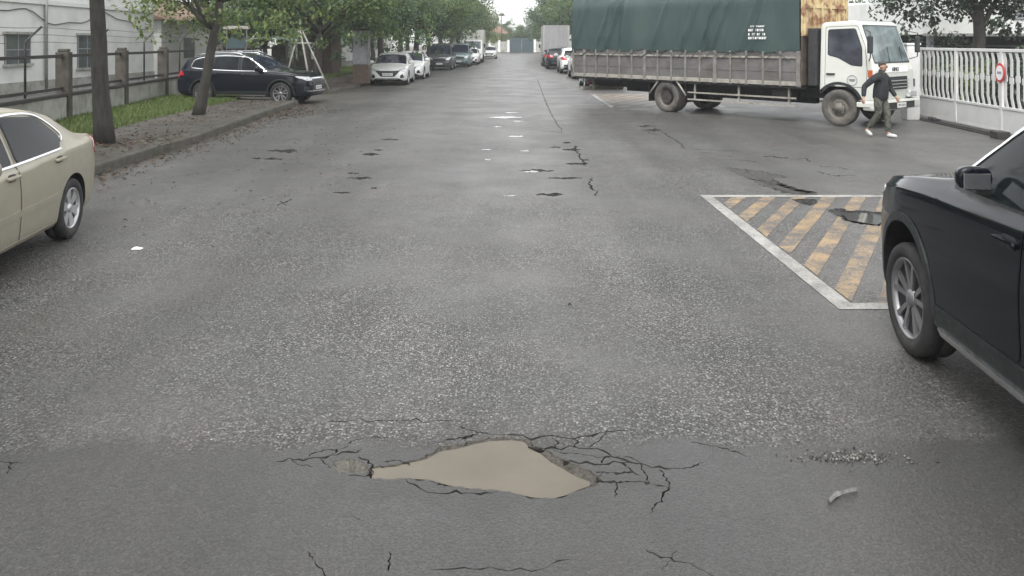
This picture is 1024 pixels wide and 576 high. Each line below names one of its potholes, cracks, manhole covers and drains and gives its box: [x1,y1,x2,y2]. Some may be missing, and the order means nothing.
crack [642,122,849,176]
crack [538,82,598,196]
crack [277,418,749,514]
pothole [368,437,601,499]
crack [645,549,713,576]
pothole [828,208,881,226]
pothole [331,459,369,473]
crack [432,559,571,572]
